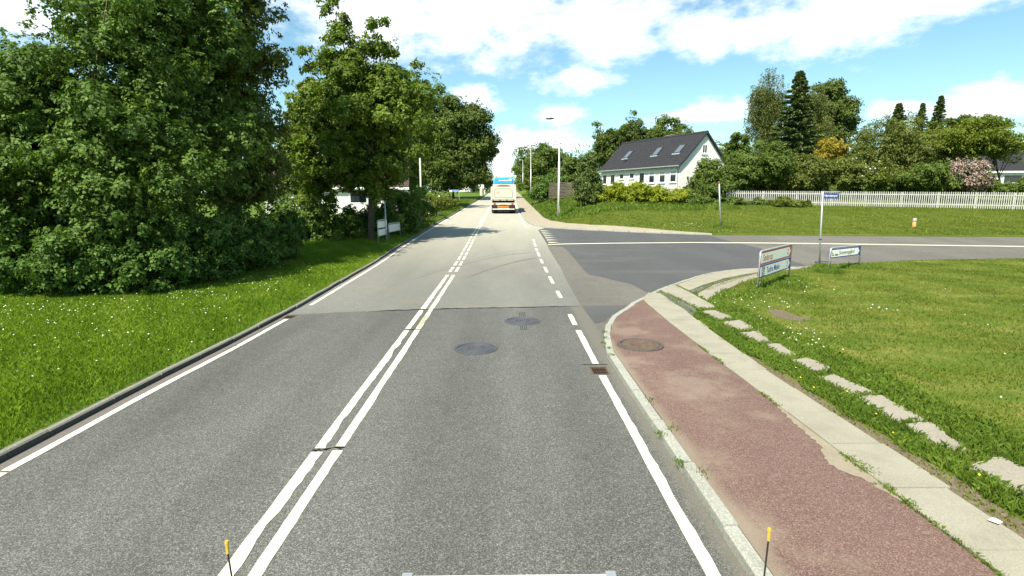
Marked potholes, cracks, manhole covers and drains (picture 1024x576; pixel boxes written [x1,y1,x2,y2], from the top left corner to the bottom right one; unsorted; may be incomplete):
manhole cover [617,338,664,352]
drain grate [589,366,610,374]
manhole cover [504,317,540,325]
manhole cover [454,342,497,355]
